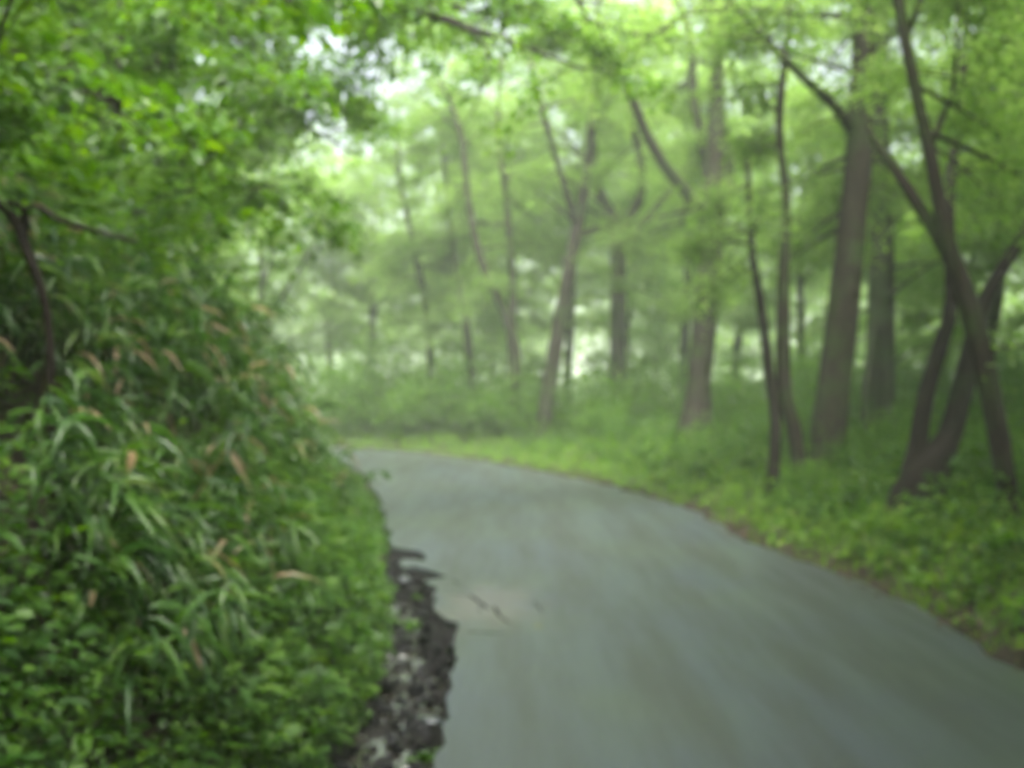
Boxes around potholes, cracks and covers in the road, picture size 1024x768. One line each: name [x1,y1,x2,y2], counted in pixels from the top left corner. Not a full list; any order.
crack [452,580,513,633]
pothole [384,549,457,674]
